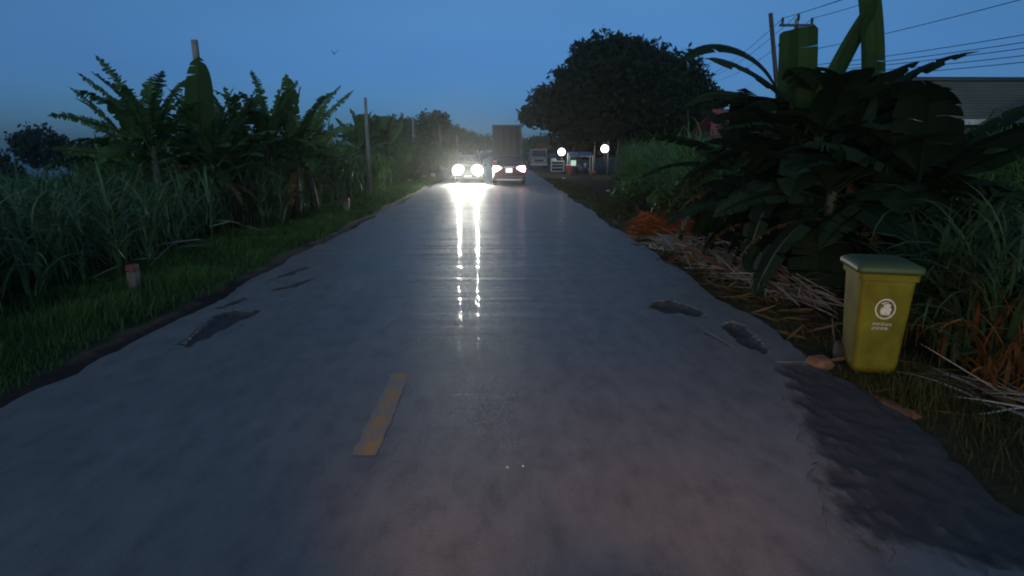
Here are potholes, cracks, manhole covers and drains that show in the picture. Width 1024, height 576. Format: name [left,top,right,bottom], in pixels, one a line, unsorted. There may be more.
pothole [269,277,317,291]
pothole [176,309,262,348]
pothole [721,322,771,354]
pothole [648,299,708,318]
pothole [268,266,311,281]
